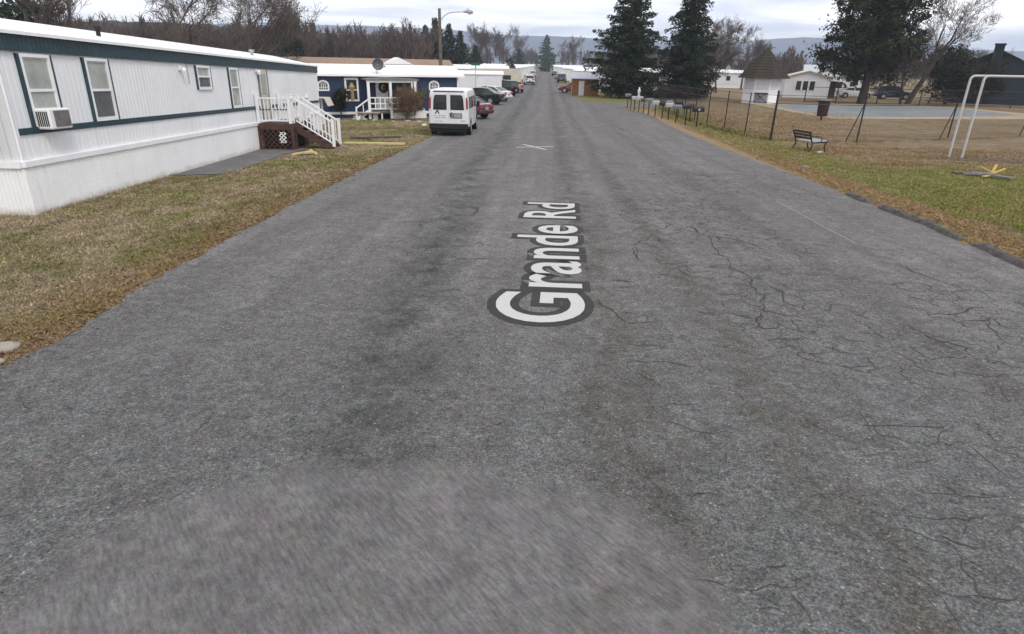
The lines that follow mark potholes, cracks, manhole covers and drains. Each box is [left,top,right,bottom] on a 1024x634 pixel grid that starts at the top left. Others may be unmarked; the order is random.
crack [596,170,1024,634]
